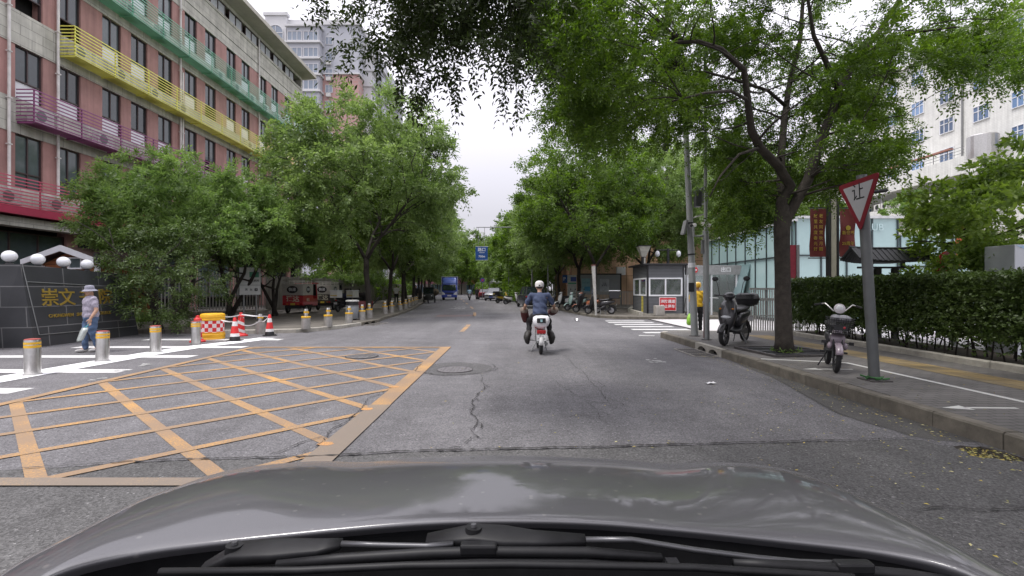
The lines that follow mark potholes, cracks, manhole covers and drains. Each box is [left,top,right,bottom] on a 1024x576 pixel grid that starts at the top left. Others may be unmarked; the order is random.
drain grate [695,342,727,357]
crack [413,363,497,449]
crack [267,389,389,456]
drain grate [673,348,719,357]
